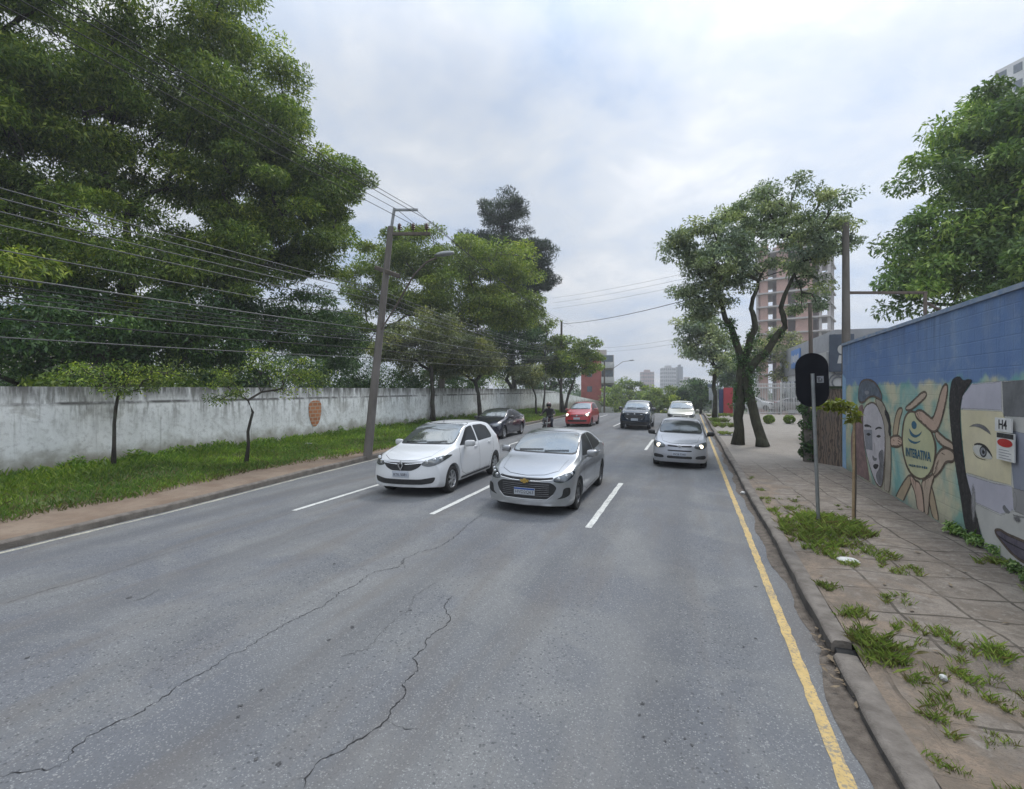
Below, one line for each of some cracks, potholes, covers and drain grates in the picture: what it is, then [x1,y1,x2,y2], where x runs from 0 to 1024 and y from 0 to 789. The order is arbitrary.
crack [2,517,477,777]
